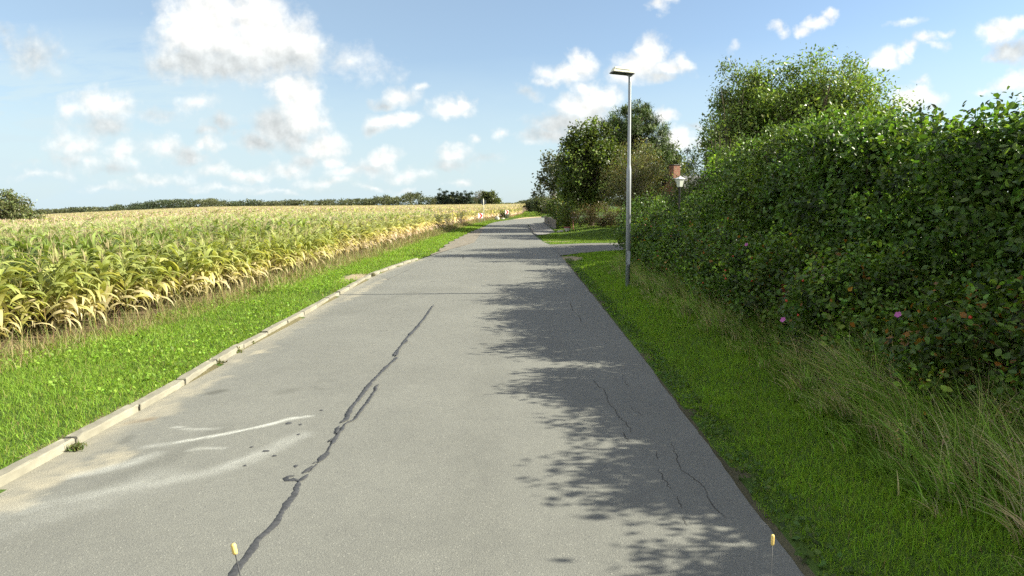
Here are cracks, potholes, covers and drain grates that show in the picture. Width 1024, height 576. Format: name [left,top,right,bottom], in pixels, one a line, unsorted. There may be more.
crack [656,442,722,522]
